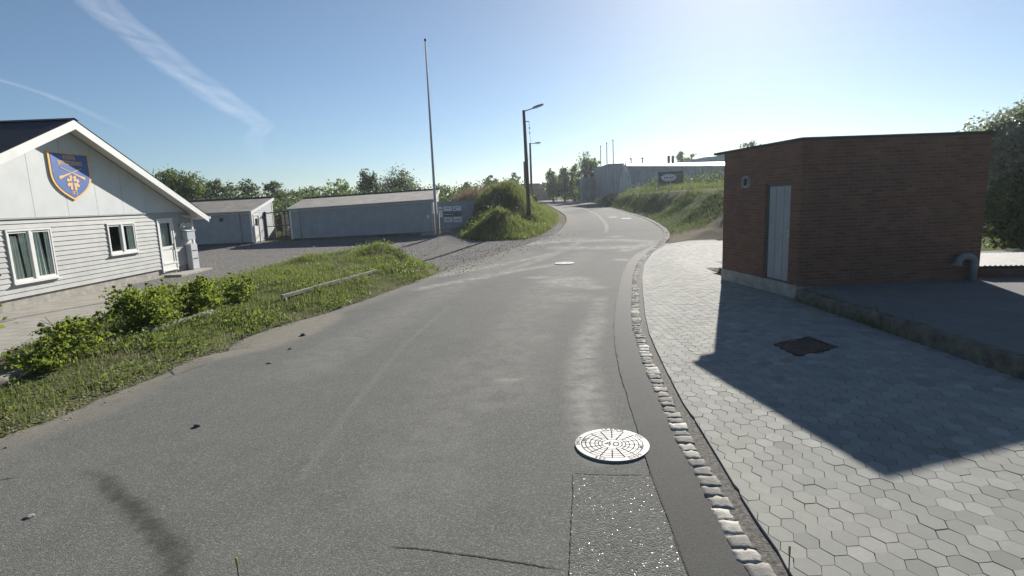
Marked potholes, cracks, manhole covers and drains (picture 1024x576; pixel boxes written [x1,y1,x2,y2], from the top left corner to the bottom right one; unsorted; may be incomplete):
manhole cover [575,429,650,463]
crack [399,547,566,570]
